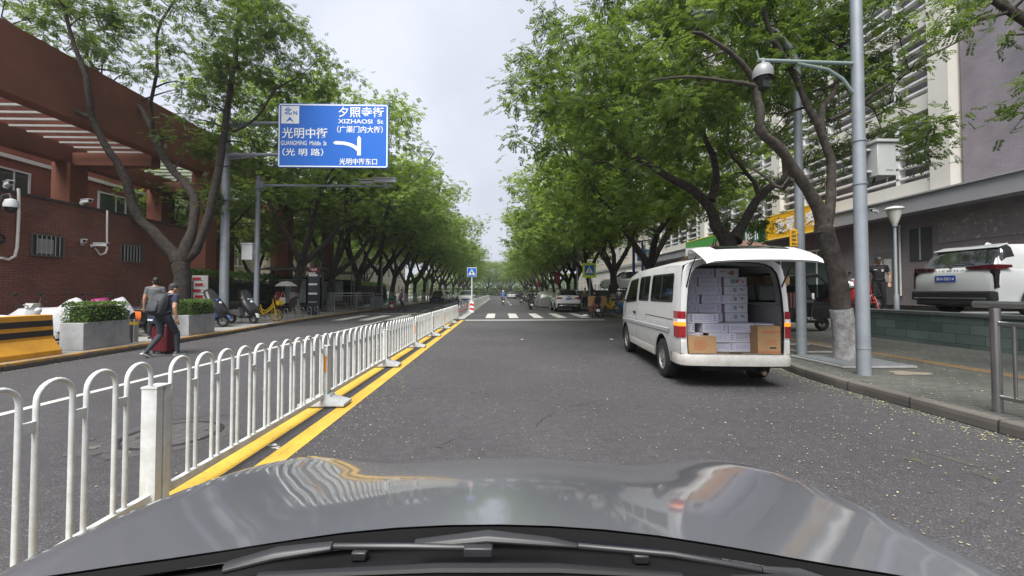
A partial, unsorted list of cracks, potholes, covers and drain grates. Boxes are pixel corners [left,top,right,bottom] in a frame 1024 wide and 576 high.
manhole cover [101,419,240,459]
